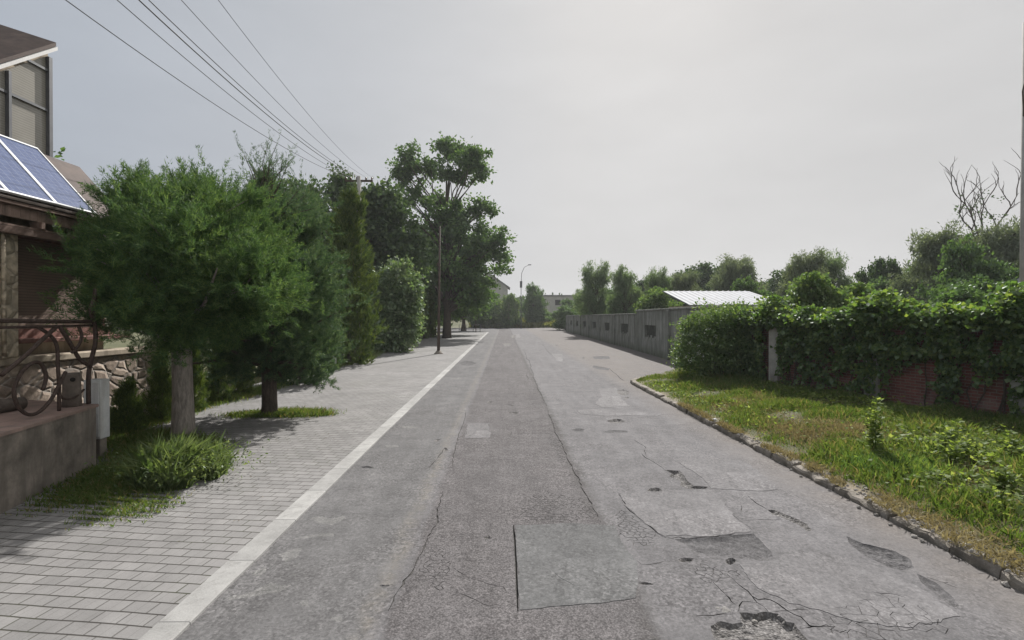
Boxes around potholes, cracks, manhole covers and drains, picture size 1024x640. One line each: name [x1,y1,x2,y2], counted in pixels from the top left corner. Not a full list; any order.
pothole [665,470,708,489]
pothole [711,612,807,640]
crack [694,564,948,640]
pothole [675,533,774,561]
crack [616,495,768,546]
